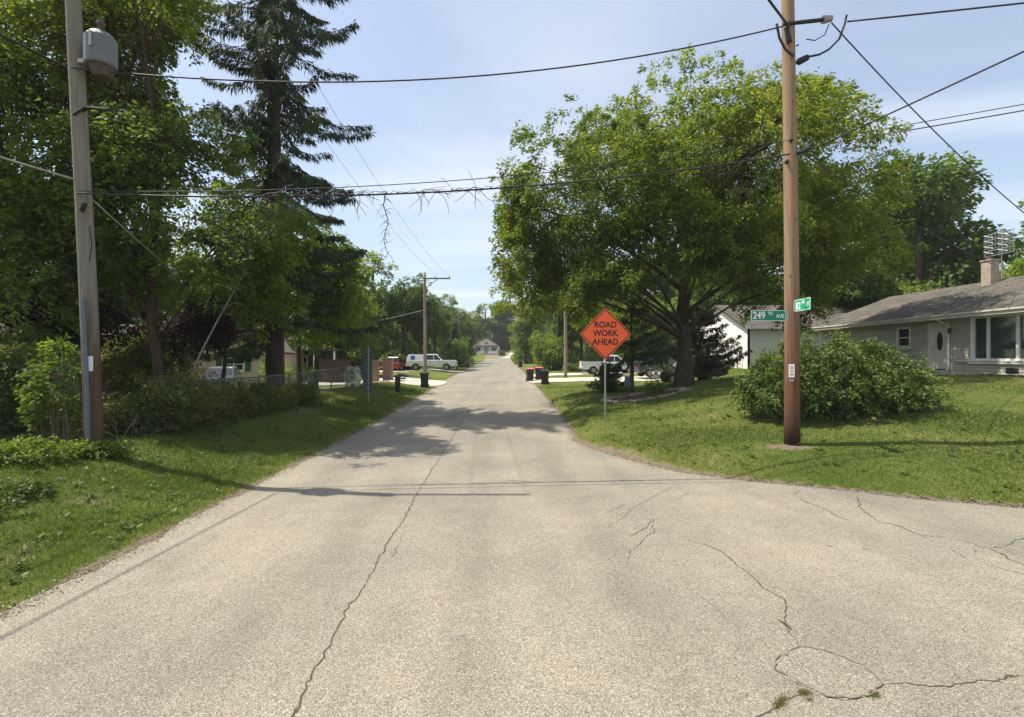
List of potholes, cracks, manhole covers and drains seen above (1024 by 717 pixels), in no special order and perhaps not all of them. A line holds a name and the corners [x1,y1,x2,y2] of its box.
crack [795,491,1024,574]
crack [689,540,800,646]
crack [609,486,688,564]
crack [884,674,1023,687]
